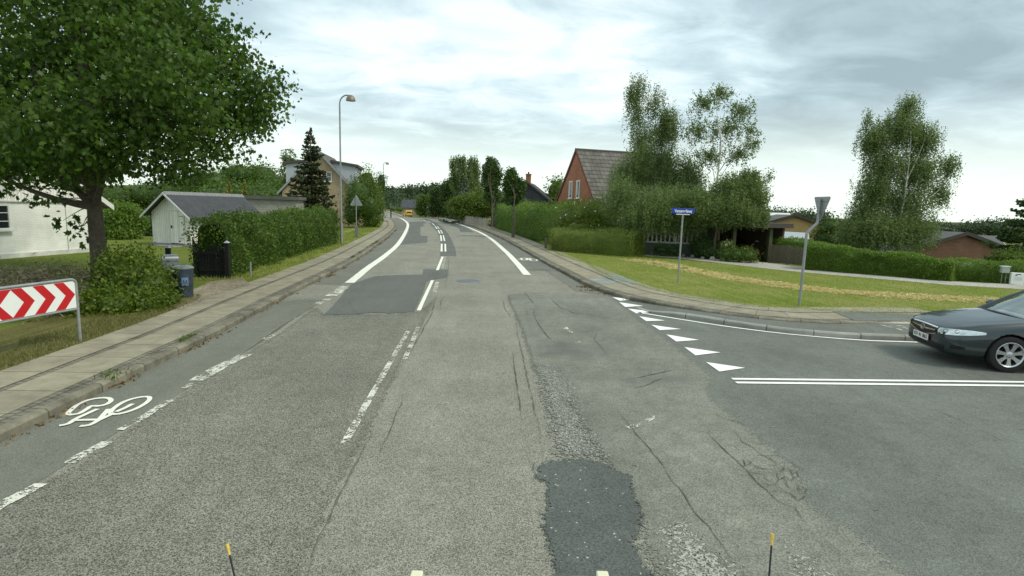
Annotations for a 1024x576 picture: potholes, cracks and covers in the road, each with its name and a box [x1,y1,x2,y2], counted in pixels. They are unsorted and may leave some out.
crack [618,411,743,573]
crack [513,293,604,450]
crack [708,413,808,525]
